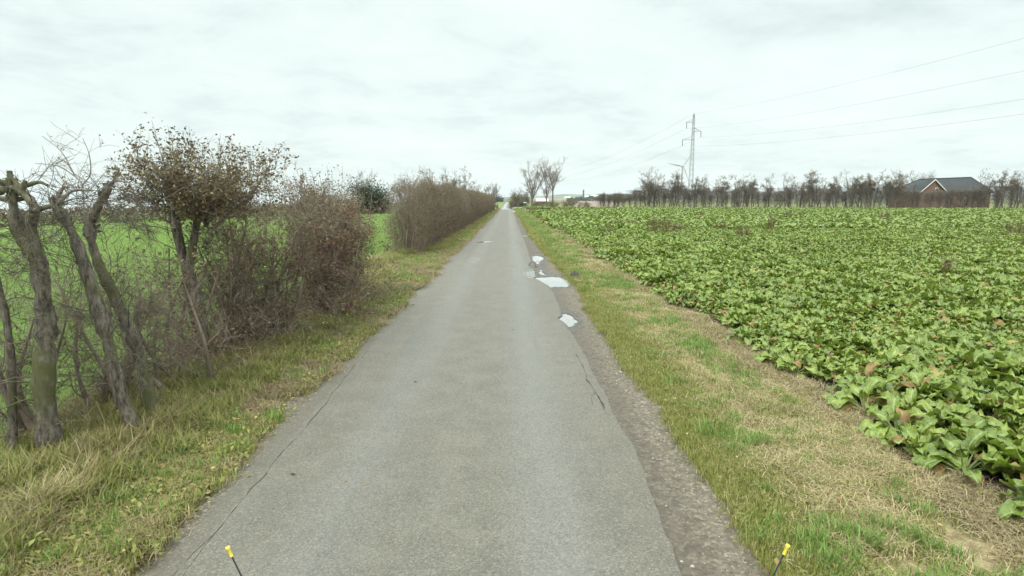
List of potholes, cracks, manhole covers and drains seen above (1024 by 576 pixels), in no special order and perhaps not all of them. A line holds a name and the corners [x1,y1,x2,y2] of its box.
pothole [533,276,571,287]
crack [183,347,370,576]
pothole [558,312,578,327]
